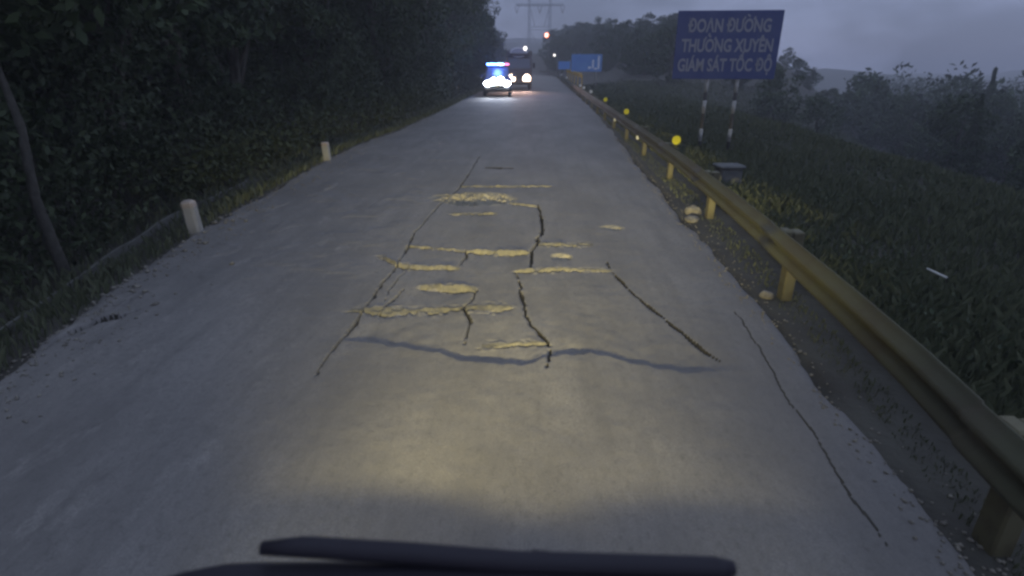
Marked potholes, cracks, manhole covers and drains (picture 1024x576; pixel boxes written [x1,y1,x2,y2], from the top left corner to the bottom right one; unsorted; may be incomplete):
crack [319,156,888,547]
